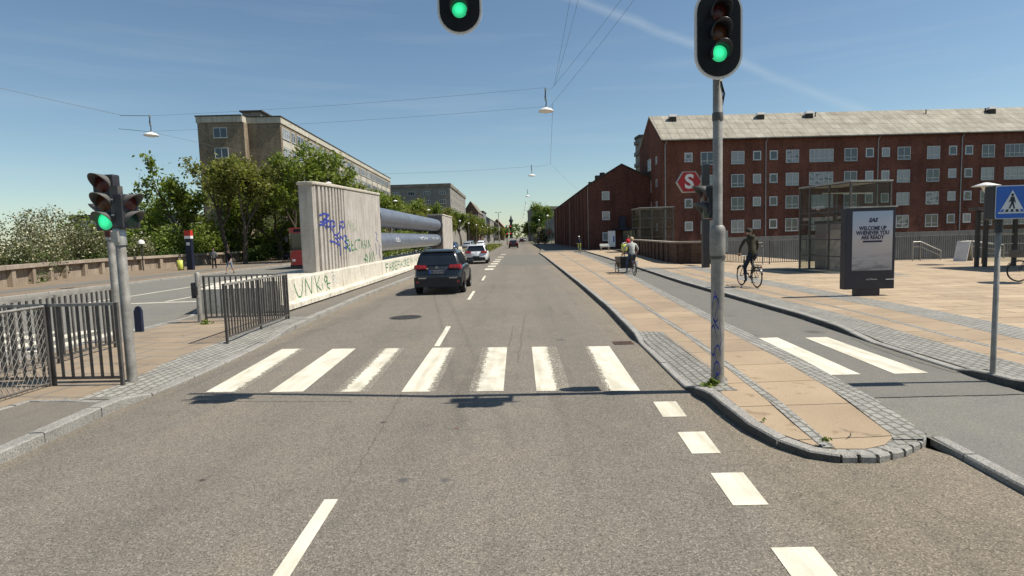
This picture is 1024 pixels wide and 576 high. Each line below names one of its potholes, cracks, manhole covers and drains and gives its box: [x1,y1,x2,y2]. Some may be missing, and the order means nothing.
crack [509,317,525,361]
